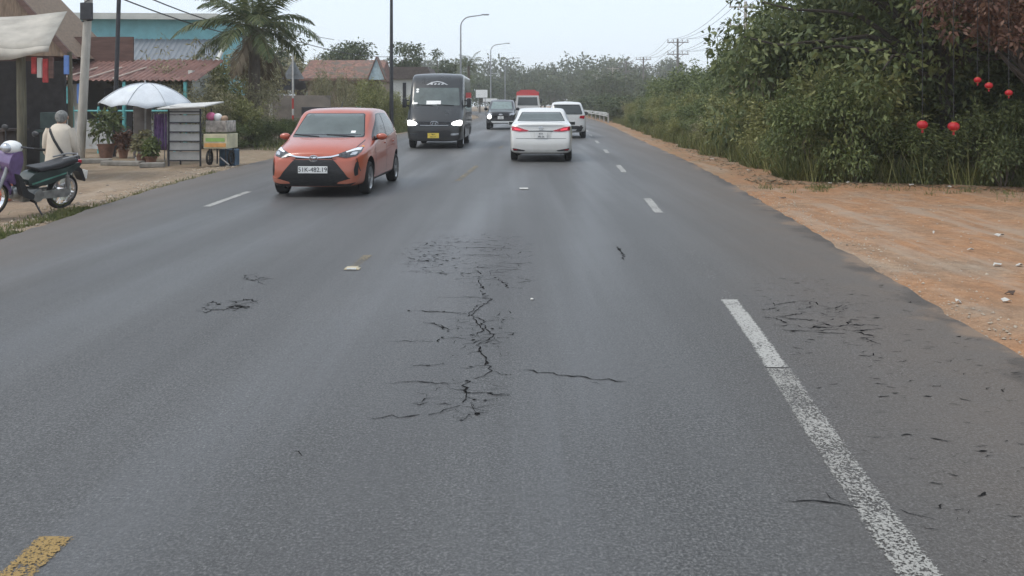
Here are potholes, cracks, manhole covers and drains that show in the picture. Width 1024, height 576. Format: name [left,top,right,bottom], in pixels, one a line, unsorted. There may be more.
crack [368,234,537,421]
crack [738,278,1024,561]
crack [533,370,625,384]
